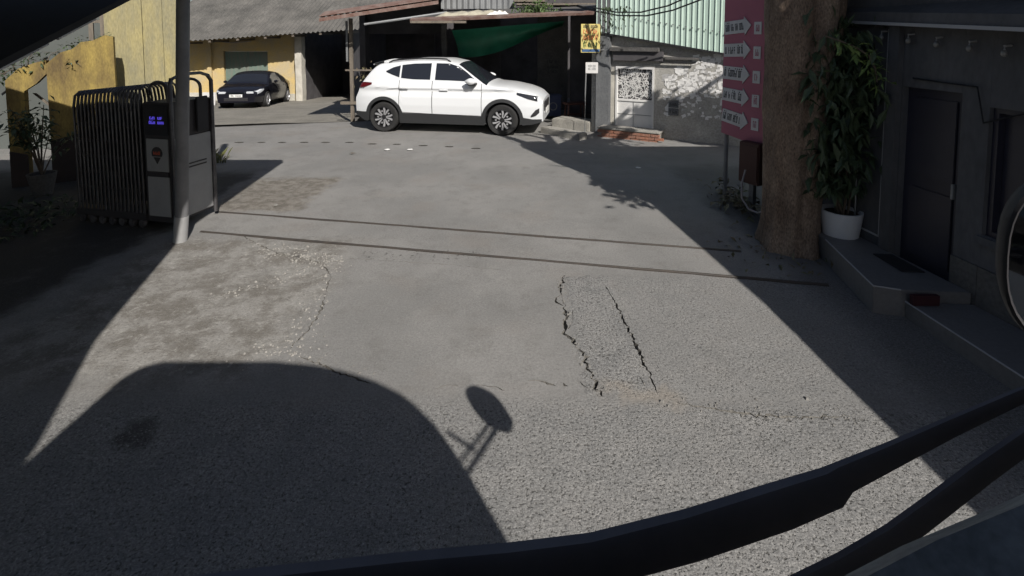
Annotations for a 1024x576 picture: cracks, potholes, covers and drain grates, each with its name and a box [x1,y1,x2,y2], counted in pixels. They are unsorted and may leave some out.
crack [528,275,602,396]
crack [671,400,866,420]
crack [203,237,369,383]
